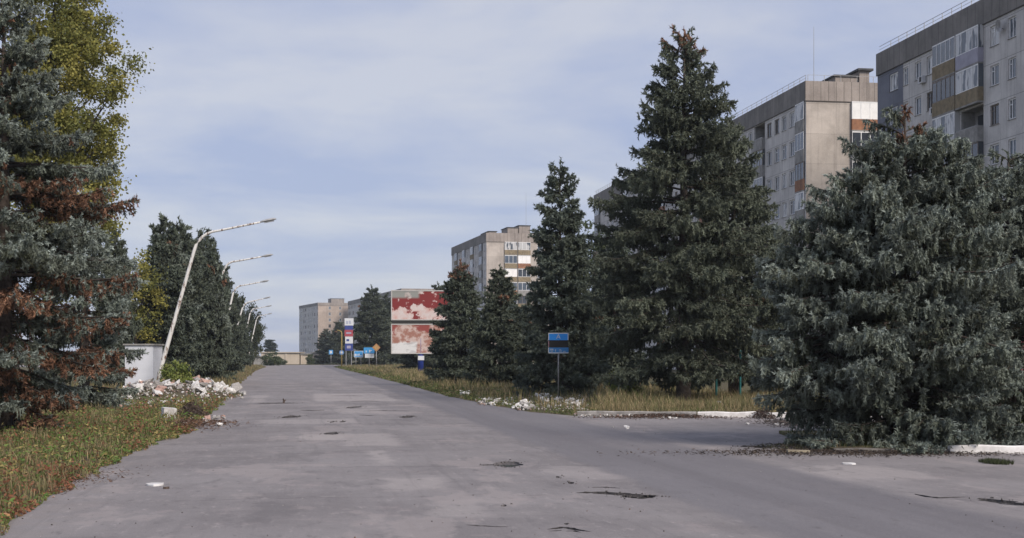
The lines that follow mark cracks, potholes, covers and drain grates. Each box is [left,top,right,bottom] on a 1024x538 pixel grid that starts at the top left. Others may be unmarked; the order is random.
pothole [577,487,656,499]
pothole [978,498,1024,506]
